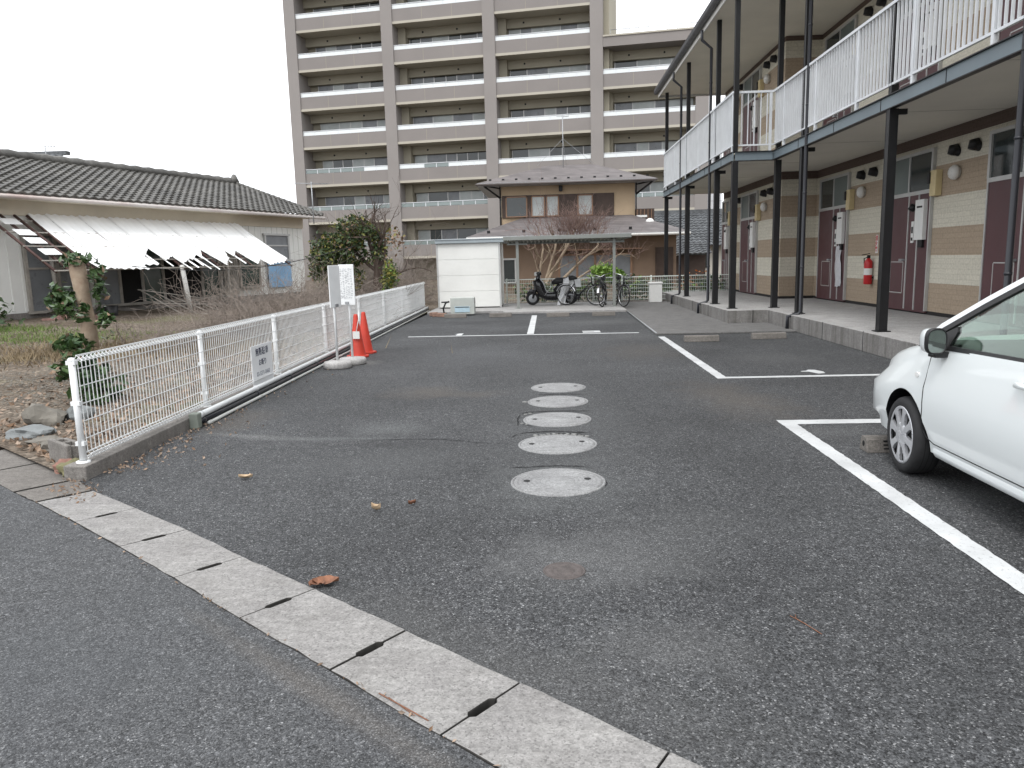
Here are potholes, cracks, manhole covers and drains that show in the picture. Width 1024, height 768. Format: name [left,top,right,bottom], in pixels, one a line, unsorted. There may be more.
manhole cover [523,412,592,427]
manhole cover [518,435,597,454]
manhole cover [511,468,606,497]
manhole cover [543,562,586,580]
manhole cover [528,396,588,408]
manhole cover [531,383,586,393]
